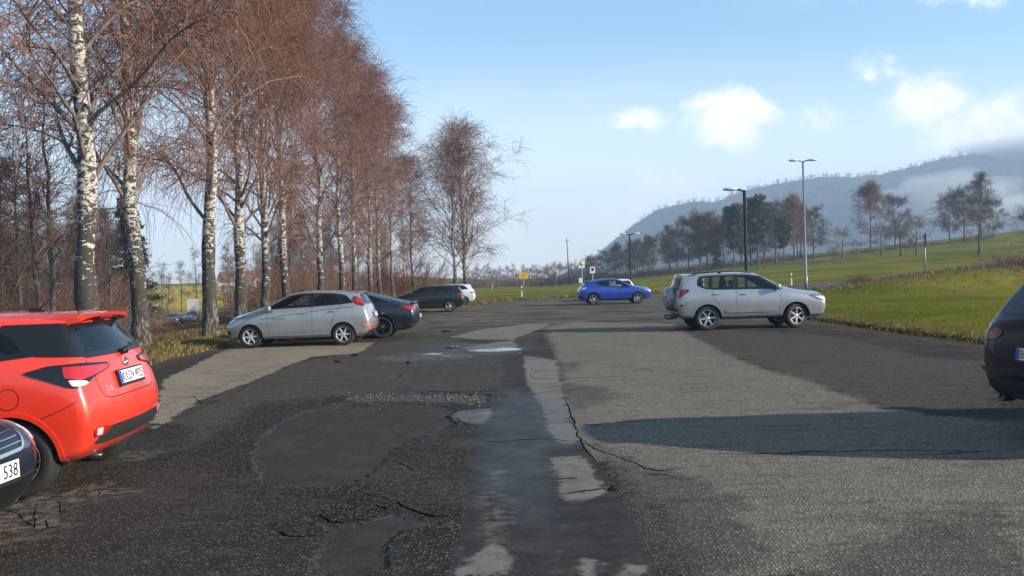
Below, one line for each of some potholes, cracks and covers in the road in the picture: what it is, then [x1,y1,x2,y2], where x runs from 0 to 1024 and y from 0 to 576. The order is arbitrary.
crack [276,462,452,538]
pothole [346,392,492,405]
crack [445,401,681,494]
crack [2,482,136,541]
